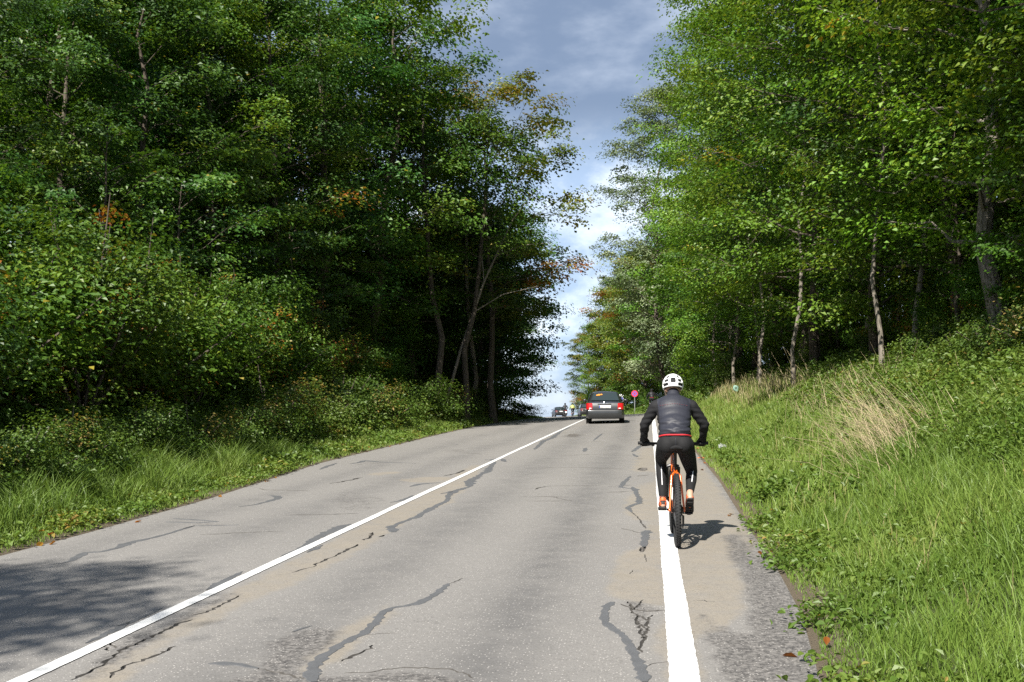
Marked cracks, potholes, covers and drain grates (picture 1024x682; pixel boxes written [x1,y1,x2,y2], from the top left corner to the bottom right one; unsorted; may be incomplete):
crack [394,444,497,502]
crack [320,460,396,484]
crack [71,596,239,680]
crack [291,533,385,573]
crack [621,600,664,666]
crack [341,645,472,678]
